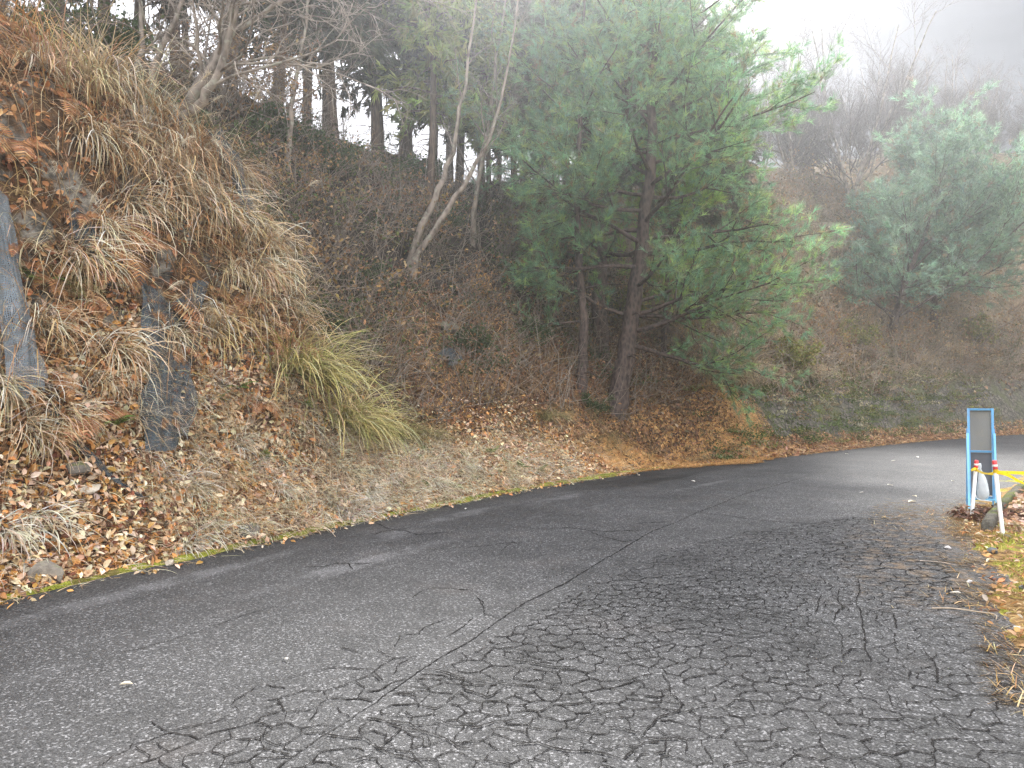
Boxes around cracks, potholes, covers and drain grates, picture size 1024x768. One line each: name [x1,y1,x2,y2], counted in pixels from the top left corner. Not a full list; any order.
crack [96,646,414,768]
crack [292,517,1024,768]
